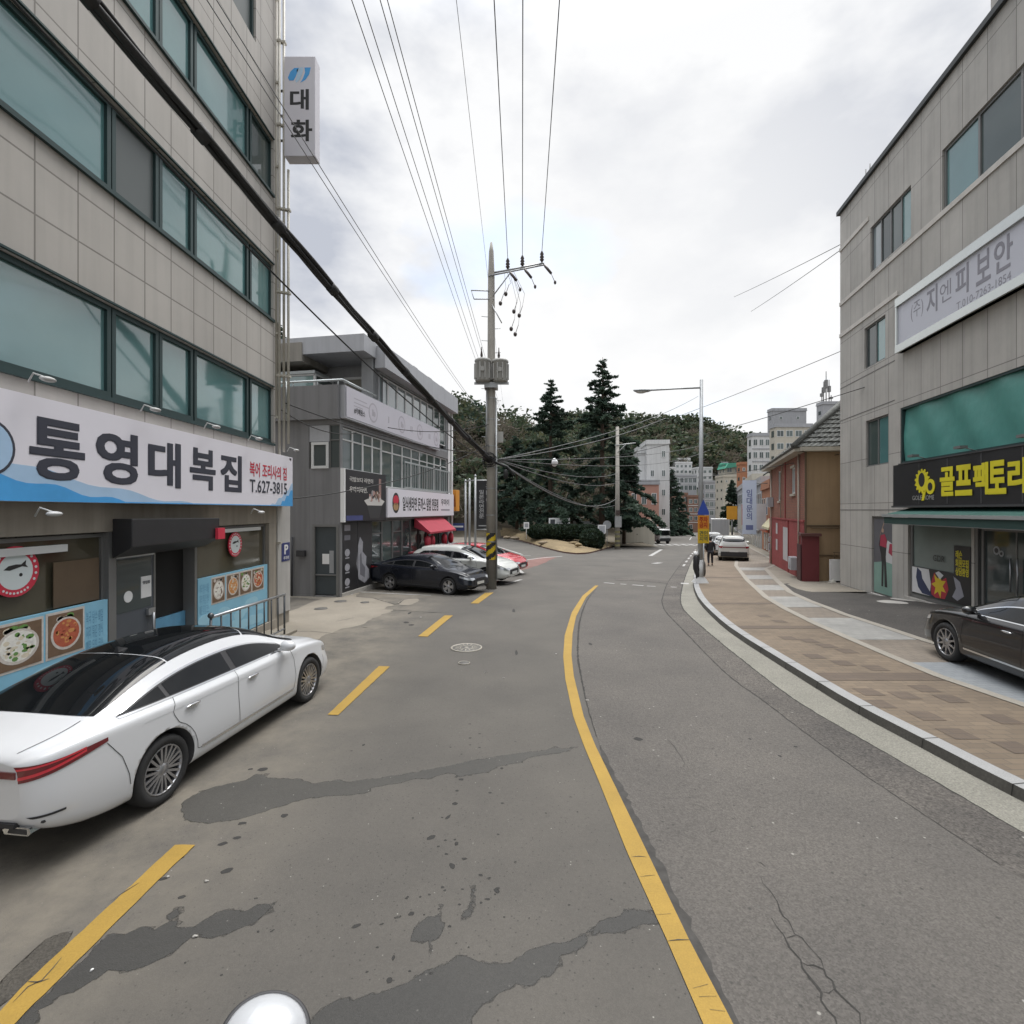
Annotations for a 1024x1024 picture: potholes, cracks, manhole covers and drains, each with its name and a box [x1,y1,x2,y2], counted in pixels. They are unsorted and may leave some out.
crack [14,957,62,1001]
crack [760,862,861,1024]
manhole cover [451,643,482,652]
